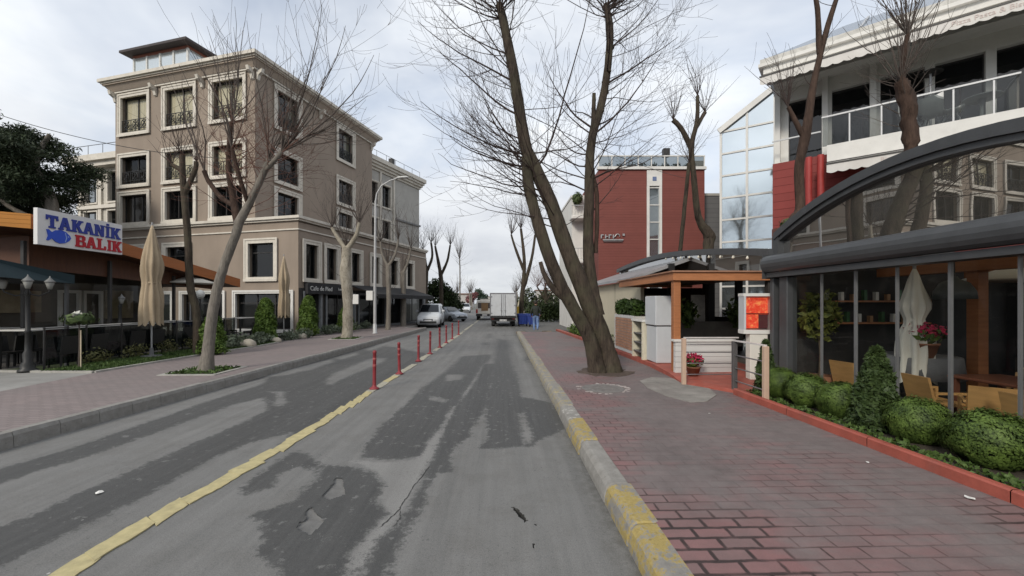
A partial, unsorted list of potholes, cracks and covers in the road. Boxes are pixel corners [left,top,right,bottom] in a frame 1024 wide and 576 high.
crack [380,464,431,527]
manhole cover [576,383,631,394]
pothole [296,507,324,535]
pothole [322,478,346,500]
